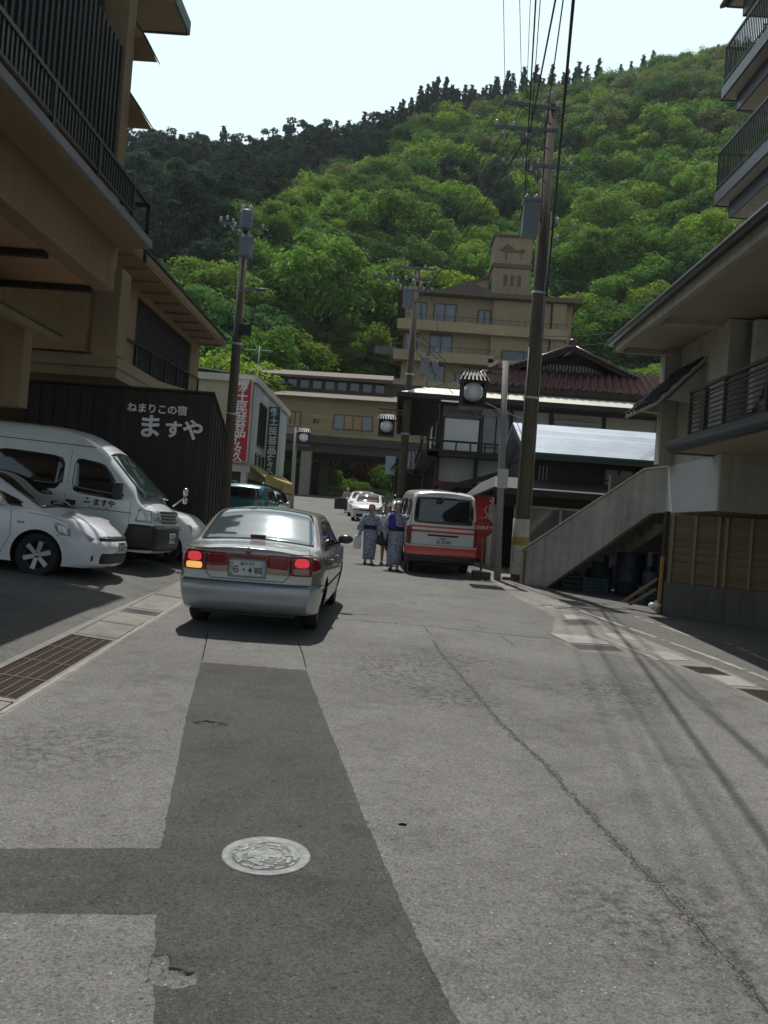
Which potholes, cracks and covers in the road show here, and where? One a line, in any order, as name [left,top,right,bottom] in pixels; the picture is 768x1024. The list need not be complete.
drain grate [737,688,768,703]
pothole [145,953,198,989]
drain grate [680,665,731,676]
manhole cover [221,837,311,876]
pothole [192,720,229,728]
drain grate [0,634,113,704]
